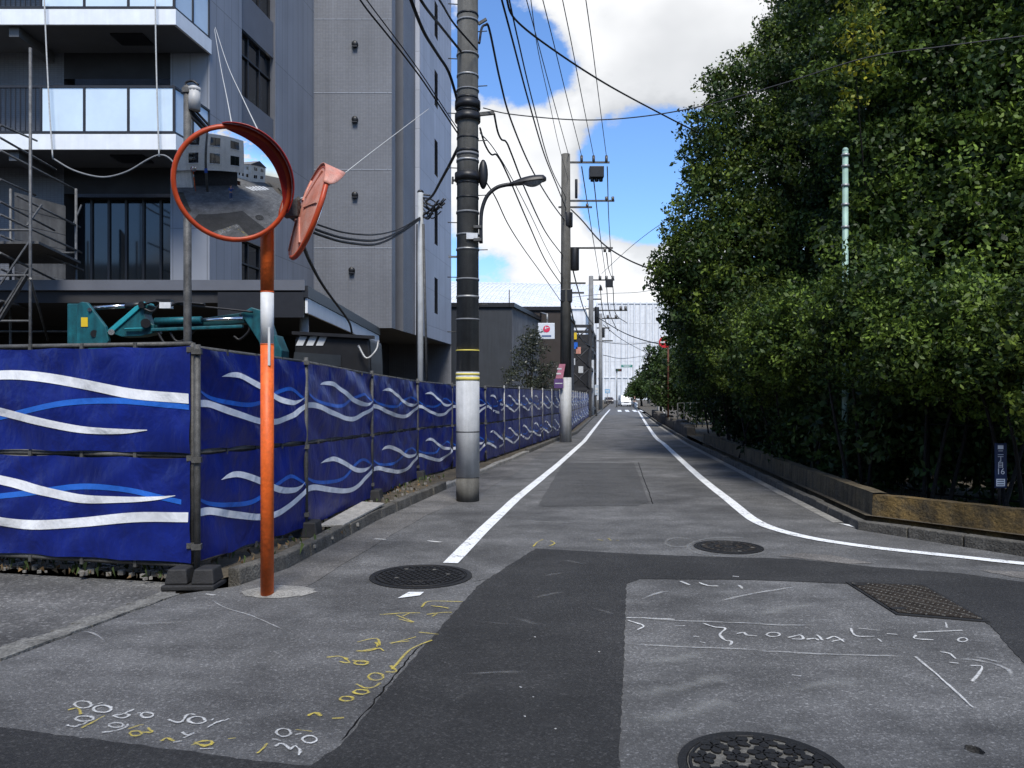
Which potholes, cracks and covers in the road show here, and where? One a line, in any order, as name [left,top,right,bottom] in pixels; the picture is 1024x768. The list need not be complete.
manhole cover [369,564,472,589]
manhole cover [678,731,845,768]
crack [342,645,422,740]
pothole [964,745,985,755]
manhole cover [694,540,764,554]
manhole cover [846,582,990,623]
